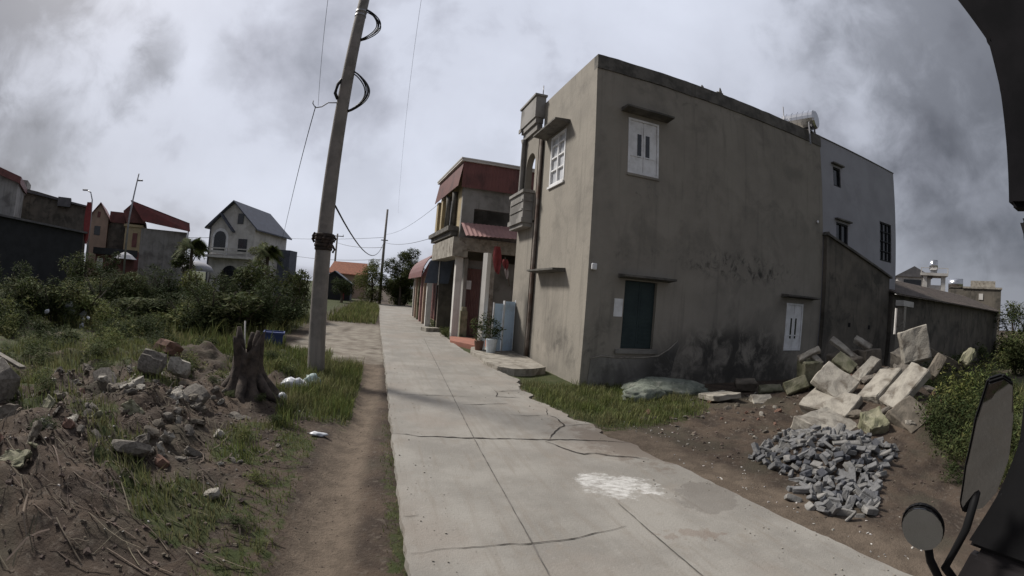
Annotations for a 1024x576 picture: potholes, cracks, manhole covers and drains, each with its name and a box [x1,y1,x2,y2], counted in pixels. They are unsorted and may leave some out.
crack [422,526,624,553]
crack [398,411,638,458]
